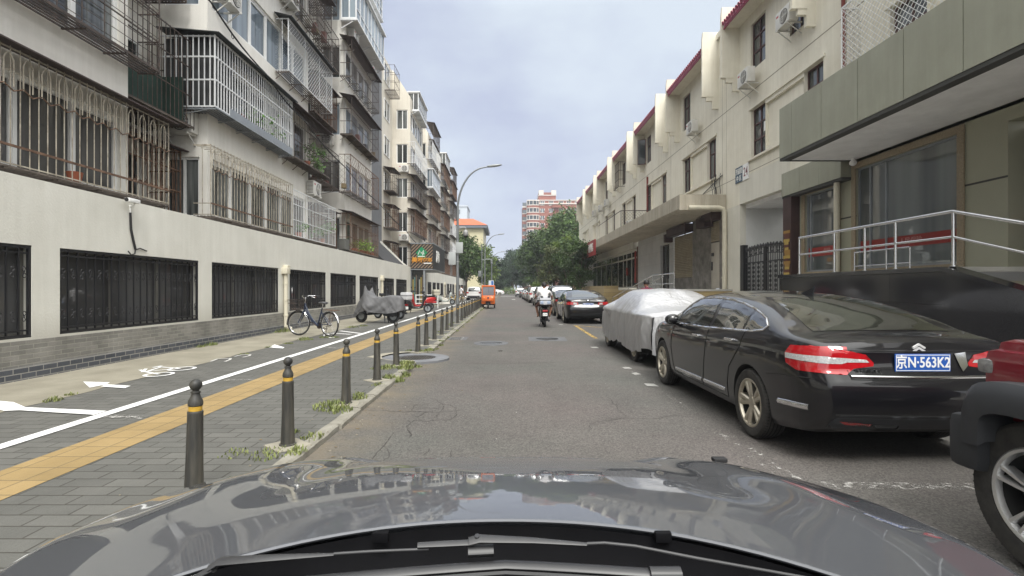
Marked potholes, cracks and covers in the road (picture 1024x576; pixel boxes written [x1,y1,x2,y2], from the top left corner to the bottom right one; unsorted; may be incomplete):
crack [368,399,458,461]
manhole cover [368,351,449,365]
